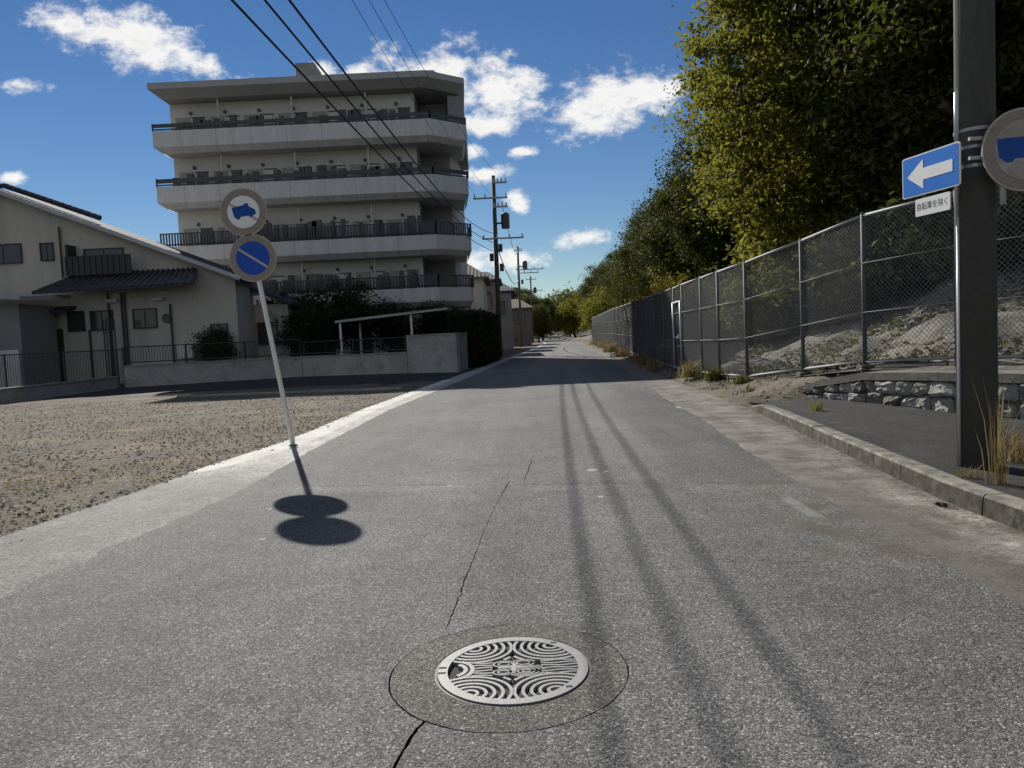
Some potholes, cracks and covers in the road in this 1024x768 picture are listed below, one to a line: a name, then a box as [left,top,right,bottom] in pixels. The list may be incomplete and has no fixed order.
manhole cover [434,637,592,707]
crack [392,722,424,768]
crack [446,457,533,629]
